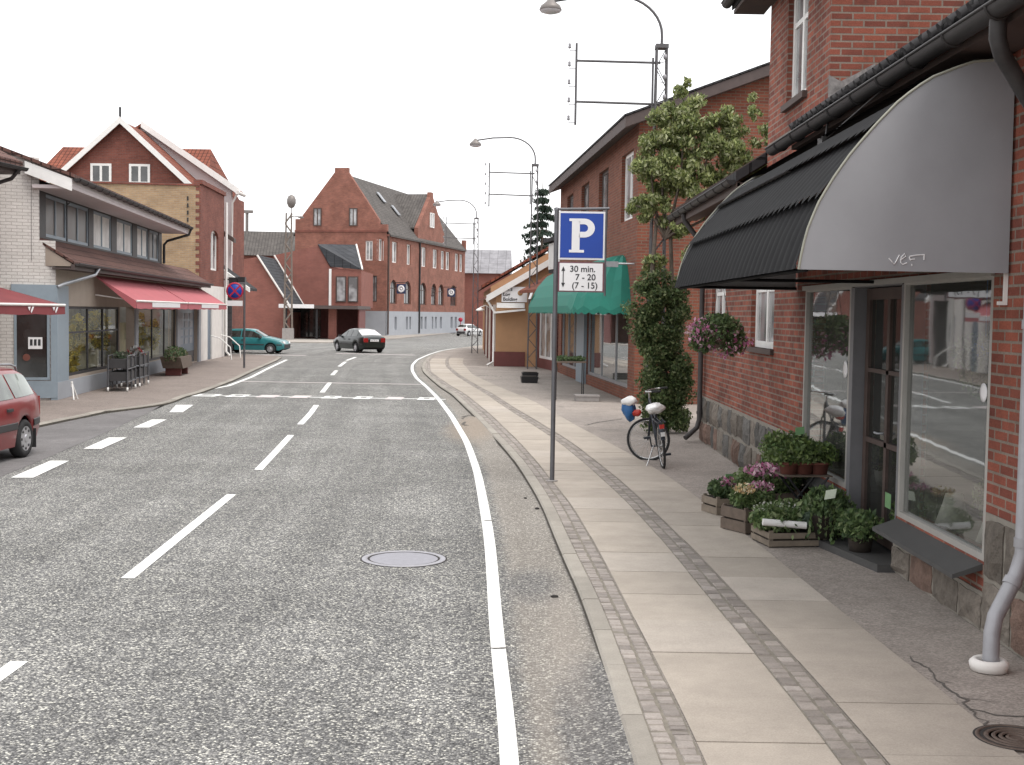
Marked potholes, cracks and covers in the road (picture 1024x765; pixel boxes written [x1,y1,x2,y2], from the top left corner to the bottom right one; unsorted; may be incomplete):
crack [910,656,1024,725]
manhole cover [360,550,447,567]
